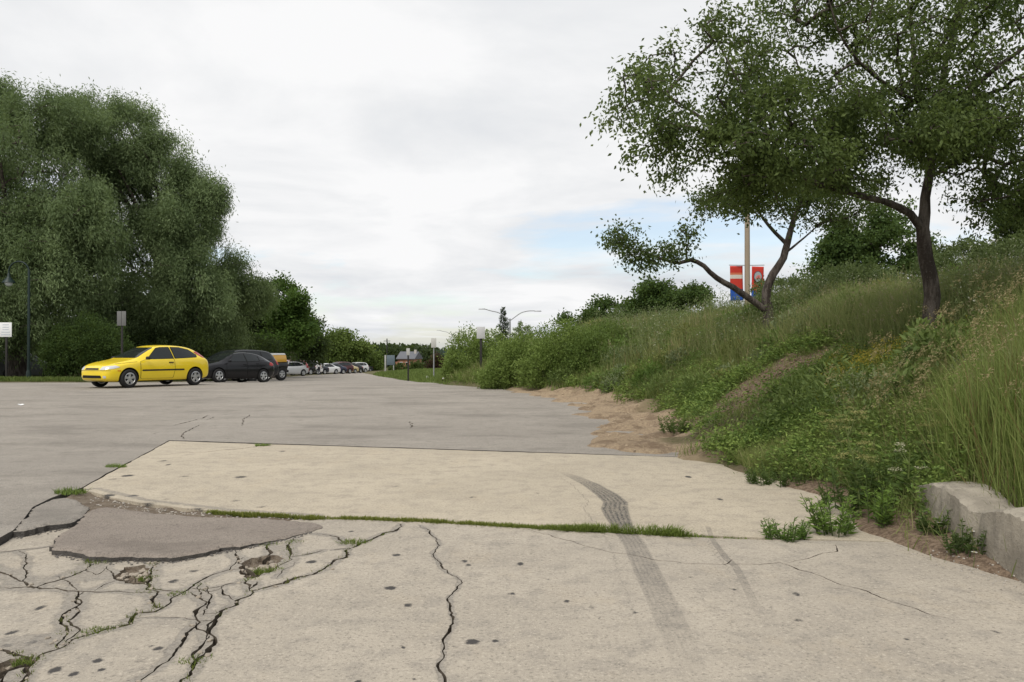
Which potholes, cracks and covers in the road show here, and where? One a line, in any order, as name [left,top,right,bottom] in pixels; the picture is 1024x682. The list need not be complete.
crack [0,525,402,682]
pothole [239,555,284,579]
pothole [115,565,152,584]
crack [420,525,463,682]
crack [534,531,965,623]
